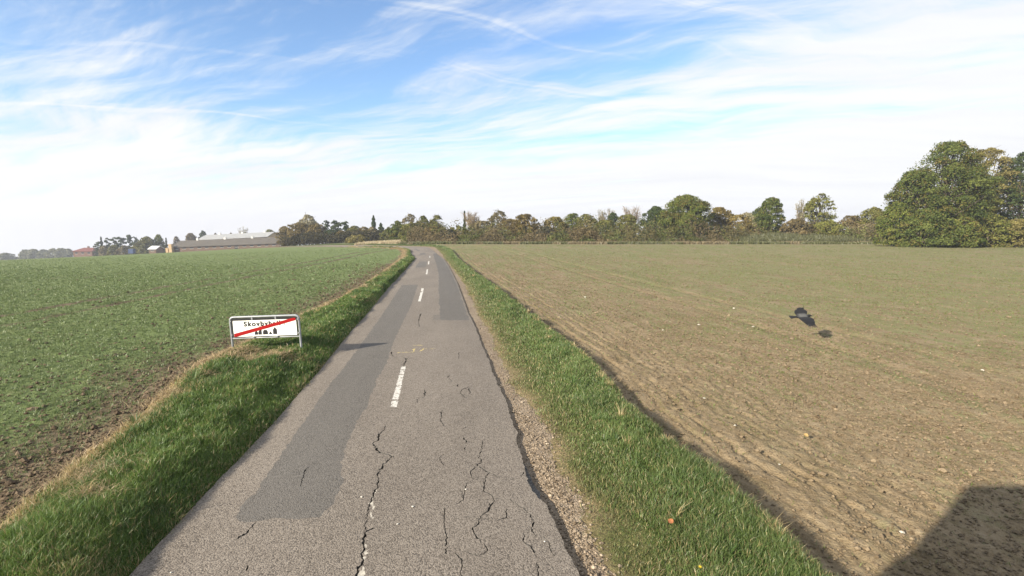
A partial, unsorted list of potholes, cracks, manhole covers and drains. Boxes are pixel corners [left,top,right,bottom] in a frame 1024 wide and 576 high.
crack [355,427,394,576]
crack [416,390,555,576]
